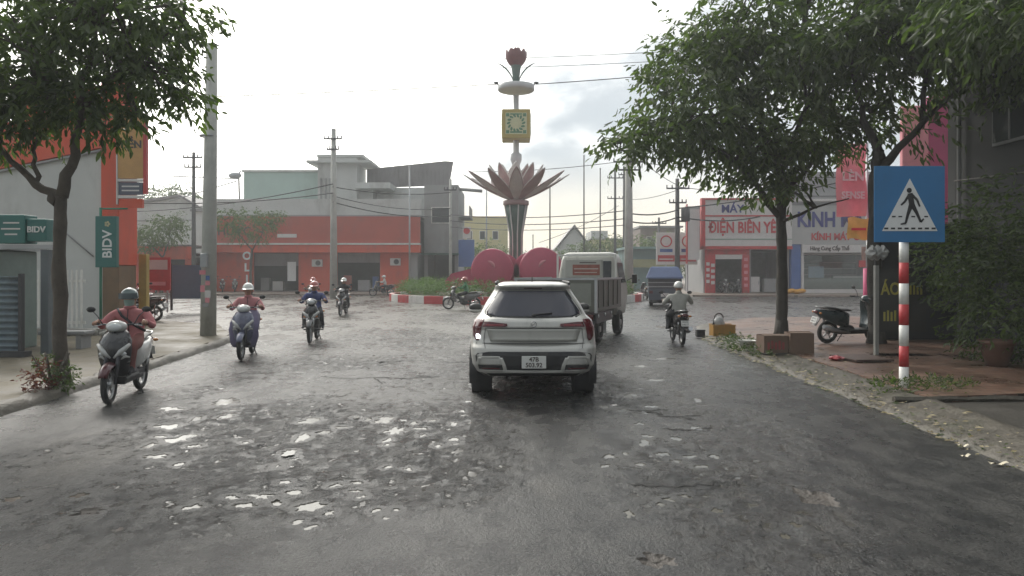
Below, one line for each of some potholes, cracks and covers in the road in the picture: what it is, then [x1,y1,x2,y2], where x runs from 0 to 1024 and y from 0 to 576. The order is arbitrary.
pothole [626,548,688,573]
pothole [223,500,265,510]
pothole [157,432,203,444]
pothole [377,425,411,436]
pothole [207,397,245,407]
pothole [785,485,849,510]
pothole [172,501,212,512]
crack [630,409,712,430]
pothole [146,423,190,432]
pothole [284,499,336,514]
pothole [275,448,304,459]
pothole [289,431,317,444]
